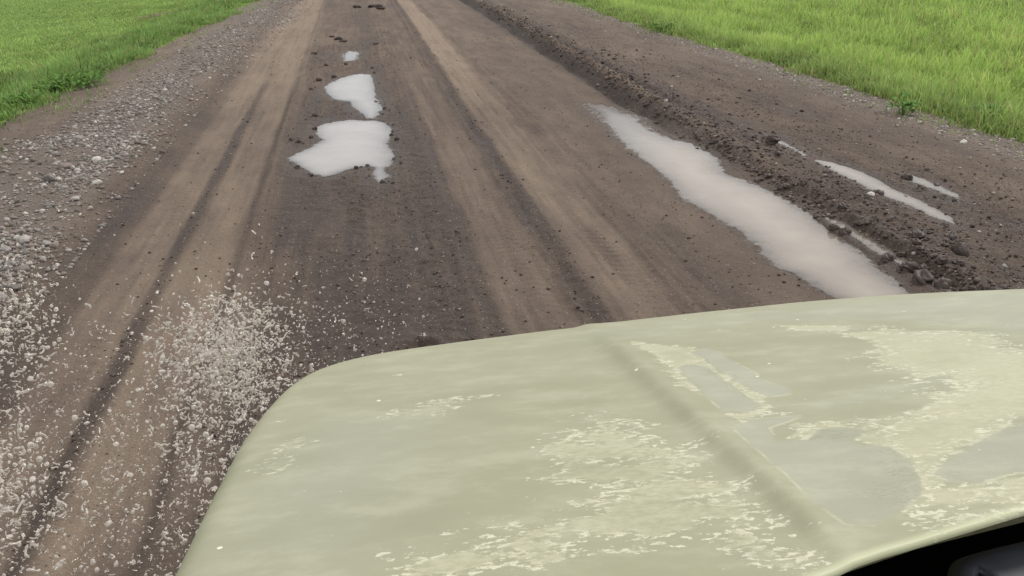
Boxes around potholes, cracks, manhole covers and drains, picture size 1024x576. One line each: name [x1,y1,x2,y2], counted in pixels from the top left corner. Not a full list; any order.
pothole [338,49,365,62]
pothole [578,101,921,300]
pothole [320,72,390,119]
pothole [281,117,401,184]
